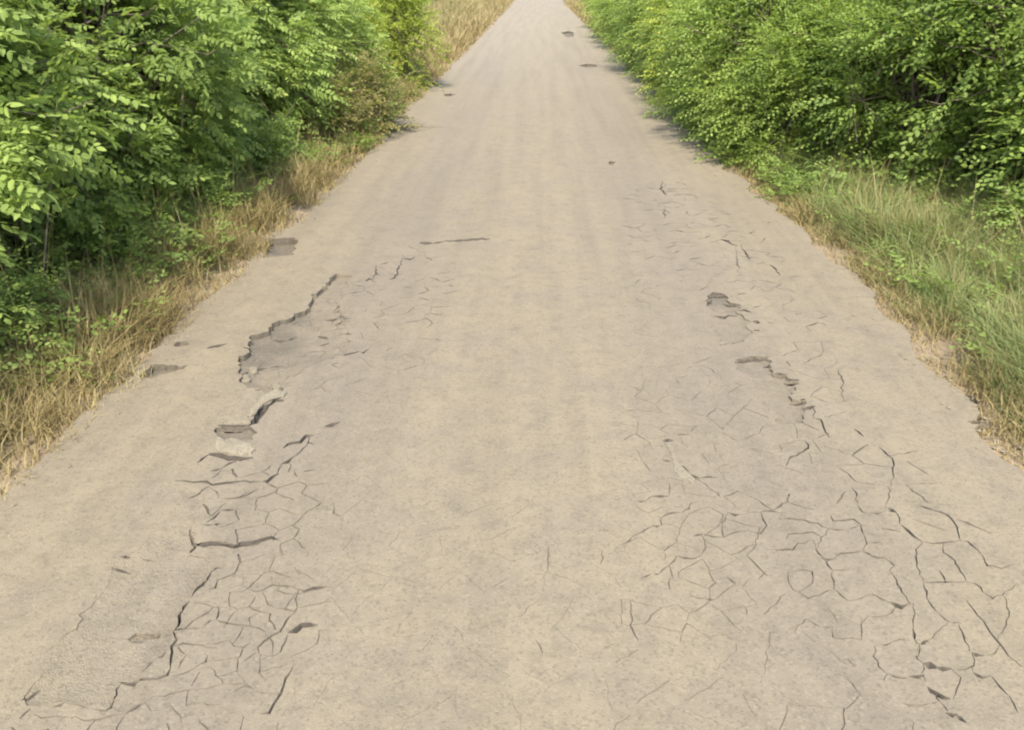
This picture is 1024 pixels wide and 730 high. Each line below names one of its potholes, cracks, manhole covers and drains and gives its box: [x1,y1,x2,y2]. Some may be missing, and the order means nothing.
pothole [735,356,810,424]
crack [12,399,620,730]
crack [242,238,490,395]
crack [620,182,852,473]
pothole [140,364,187,379]
pothole [706,294,753,346]
pothole [214,426,257,440]
crack [612,357,1022,730]
pothole [258,237,299,258]
pothole [238,274,352,393]
